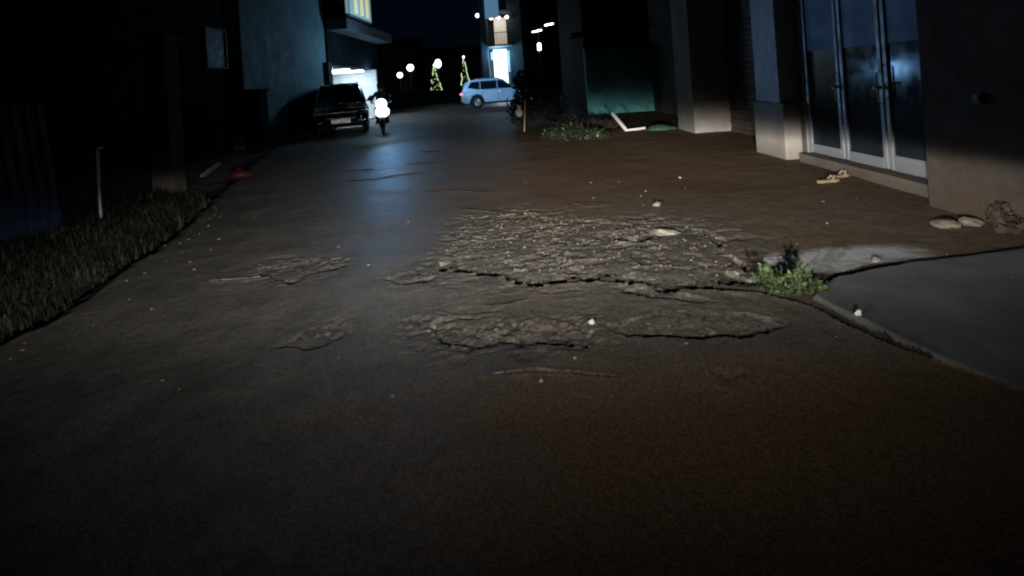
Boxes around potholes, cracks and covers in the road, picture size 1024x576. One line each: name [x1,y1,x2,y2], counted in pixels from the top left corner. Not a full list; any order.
crack [488,367,623,378]
pothole [409,314,599,352]
pothole [616,283,722,303]
pothole [590,308,796,341]
crack [341,150,499,212]
pothole [433,211,758,293]
pothole [267,318,351,351]
pothole [250,257,360,285]
